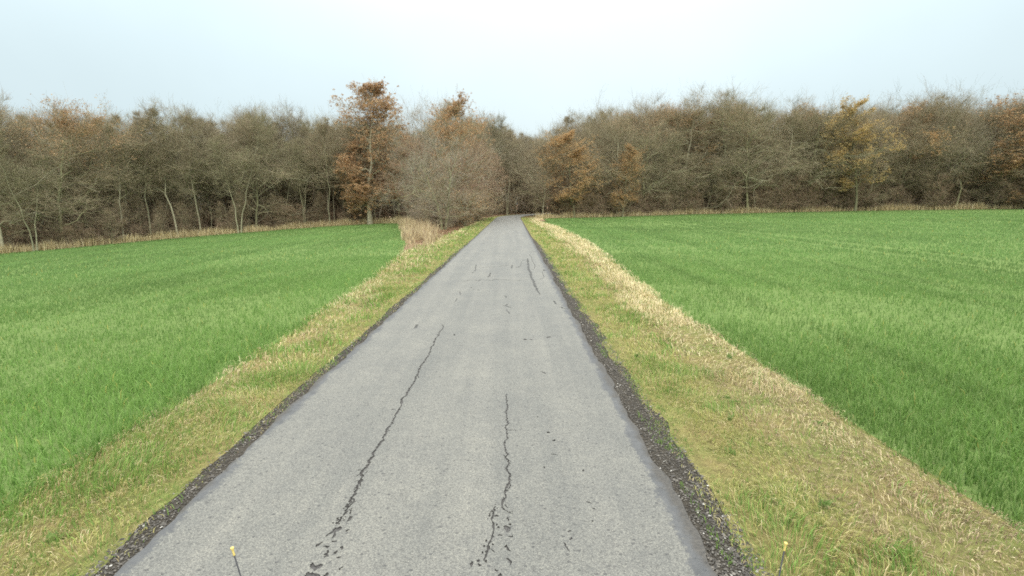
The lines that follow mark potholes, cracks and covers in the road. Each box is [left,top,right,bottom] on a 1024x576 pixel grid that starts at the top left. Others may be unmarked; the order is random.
crack [455,257,568,314]
crack [470,394,517,576]
crack [305,325,444,576]
